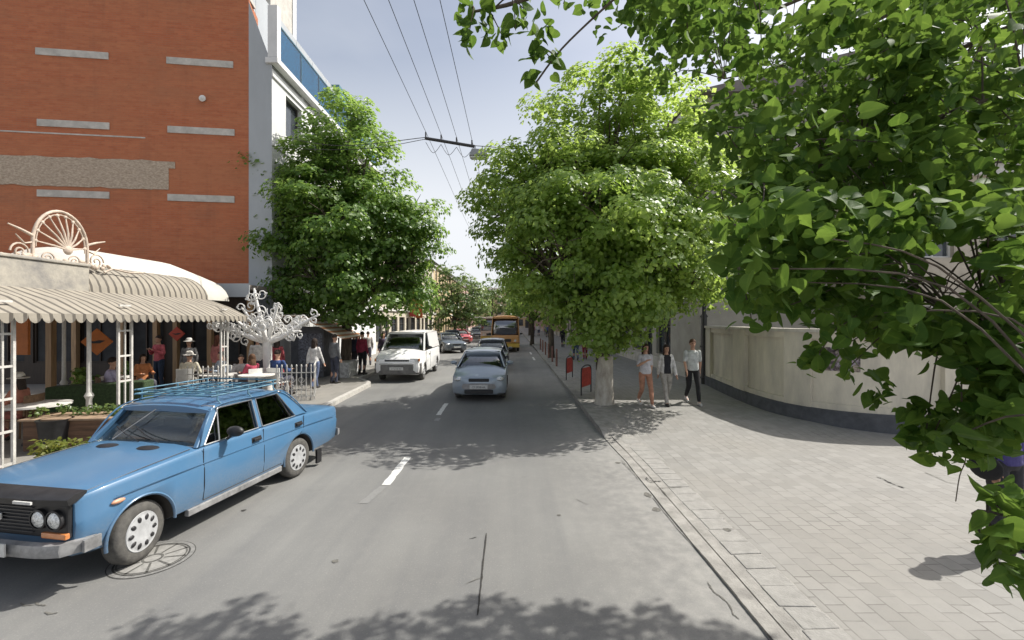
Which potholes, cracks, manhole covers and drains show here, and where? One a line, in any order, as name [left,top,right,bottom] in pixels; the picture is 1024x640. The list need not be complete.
manhole cover [105,541,196,579]
crack [466,533,487,615]
